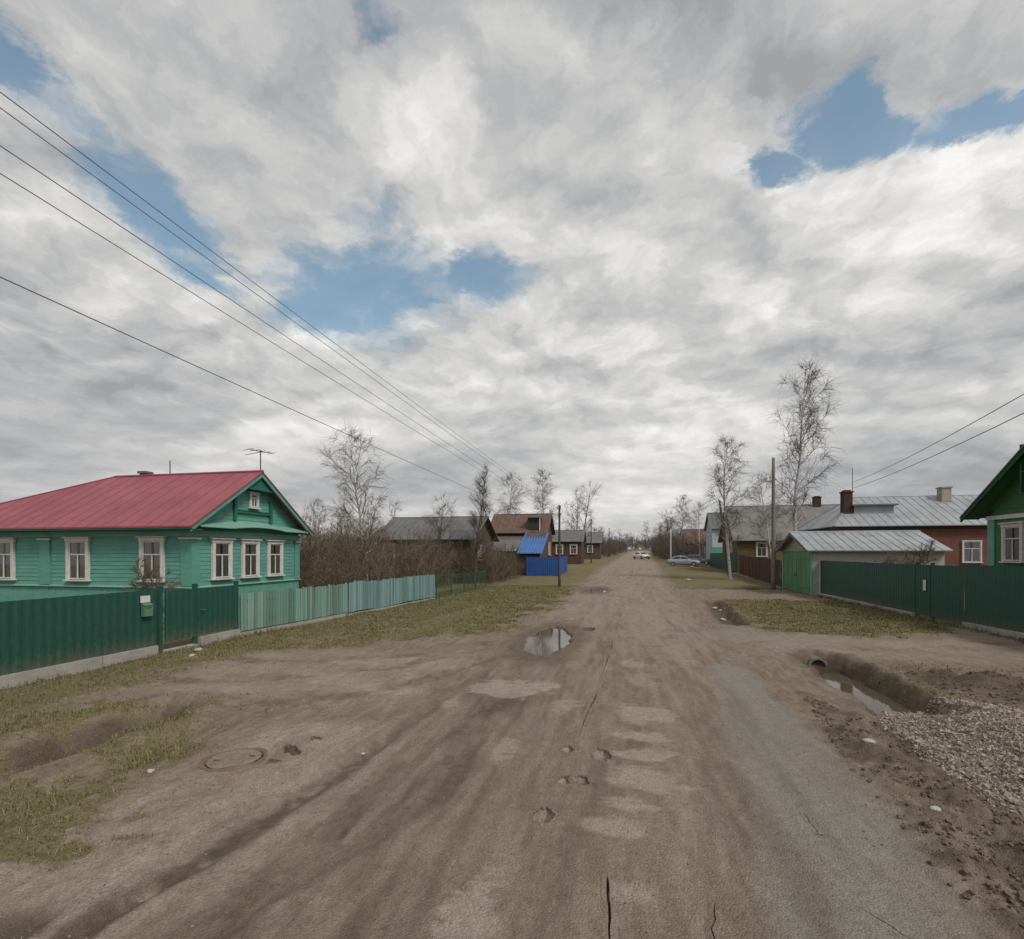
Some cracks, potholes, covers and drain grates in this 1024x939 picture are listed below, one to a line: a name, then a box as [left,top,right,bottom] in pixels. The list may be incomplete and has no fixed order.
crack [851,902,917,939]
pothole [528,804,559,826]
pothole [553,774,577,786]
manhole cover [198,748,268,772]
pothole [519,625,576,659]
pothole [557,744,577,755]
crack [703,899,724,939]
crack [799,813,825,836]
crack [574,602,625,743]
pothole [588,746,615,763]
pothole [568,773,592,788]
pothole [279,742,306,756]
